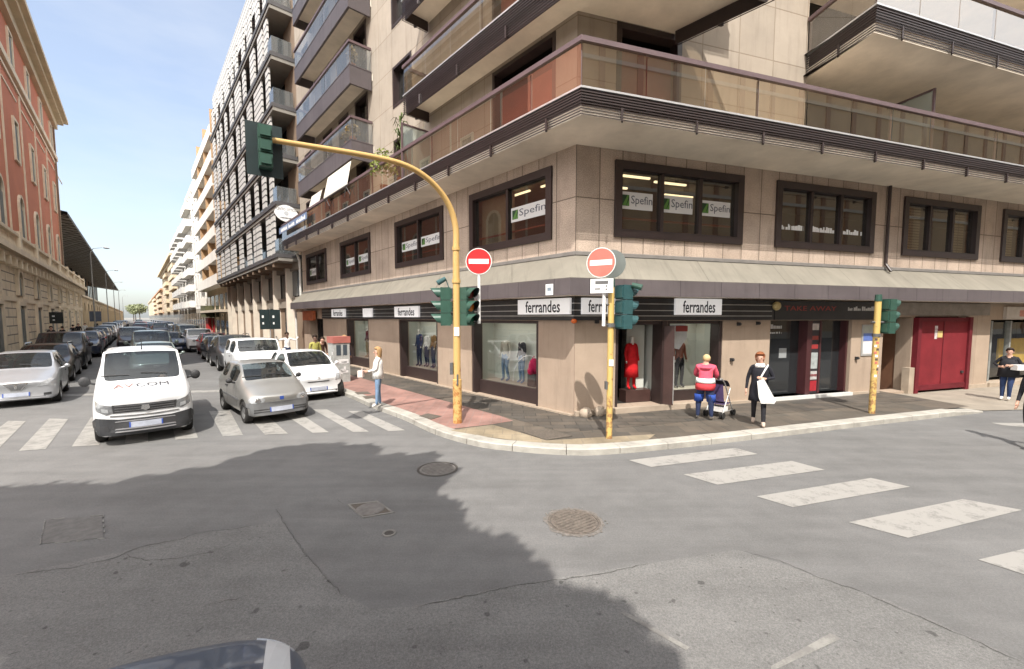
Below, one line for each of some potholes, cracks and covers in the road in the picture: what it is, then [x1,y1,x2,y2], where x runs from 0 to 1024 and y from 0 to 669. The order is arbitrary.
manhole cover [543,507,608,537]
manhole cover [347,501,395,518]
manhole cover [417,462,458,476]
crack [416,564,645,607]
